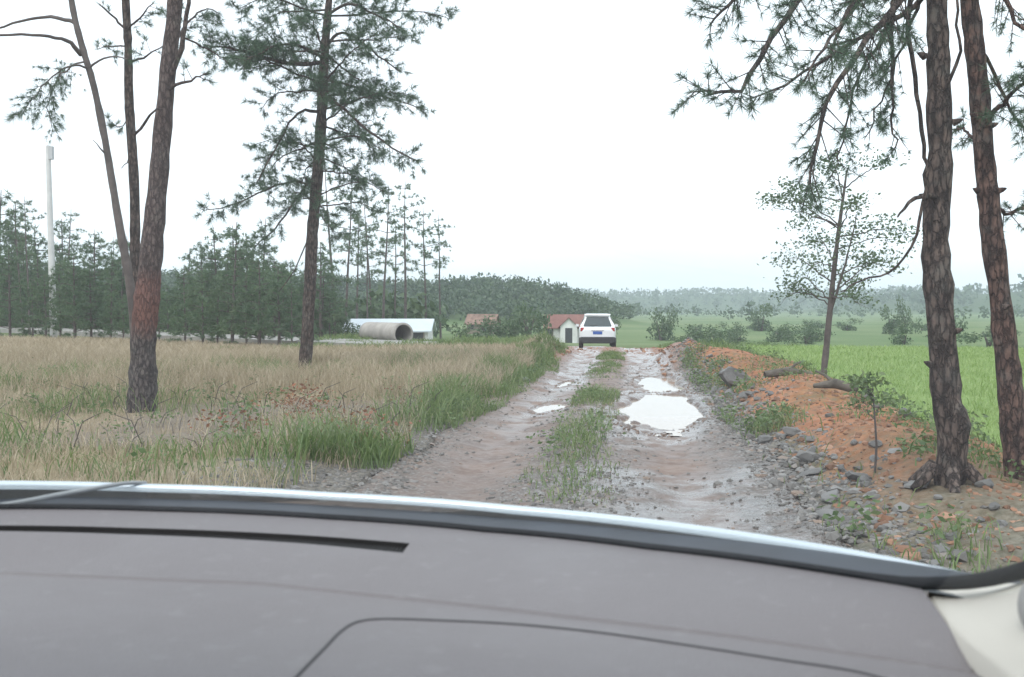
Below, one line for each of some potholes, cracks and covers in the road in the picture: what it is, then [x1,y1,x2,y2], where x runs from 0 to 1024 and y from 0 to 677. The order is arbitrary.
pothole [602,389,714,440]
pothole [527,399,575,415]
pothole [630,372,693,395]
